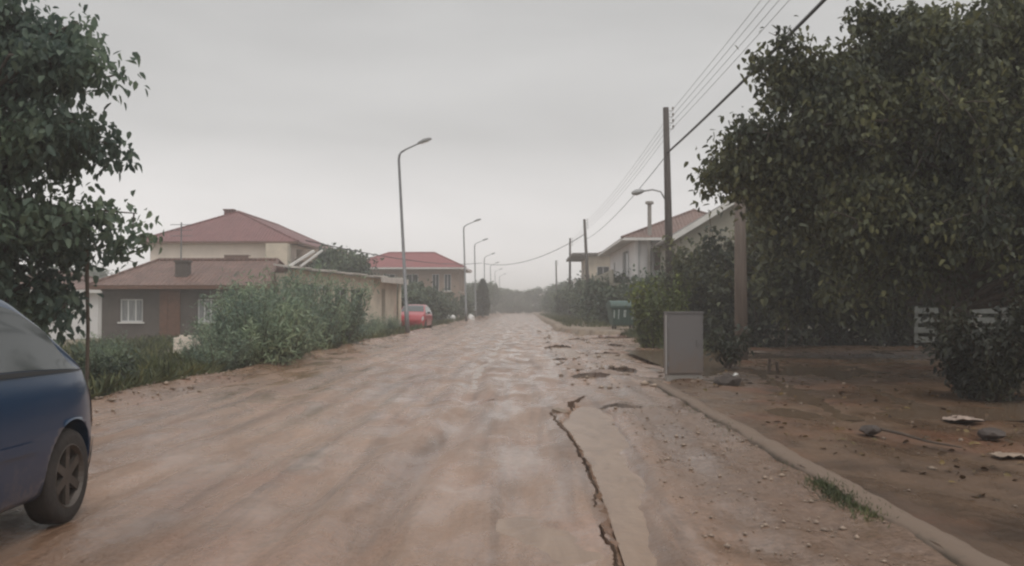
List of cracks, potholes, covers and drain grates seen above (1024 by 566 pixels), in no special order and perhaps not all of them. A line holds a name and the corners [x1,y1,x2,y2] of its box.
crack [550,396,599,507]
crack [598,524,619,566]
